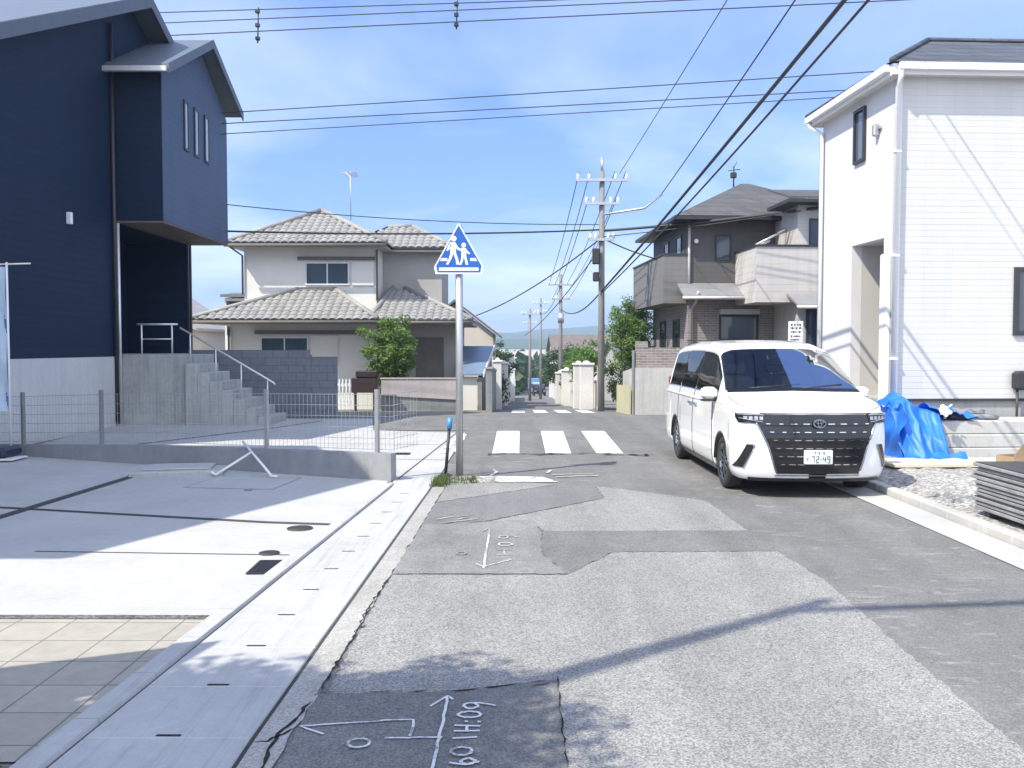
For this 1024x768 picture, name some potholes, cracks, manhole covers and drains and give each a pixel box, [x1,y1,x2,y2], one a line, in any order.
drain grate [245,560,282,574]
crack [255,574,543,768]
utility cover [183,476,301,489]
